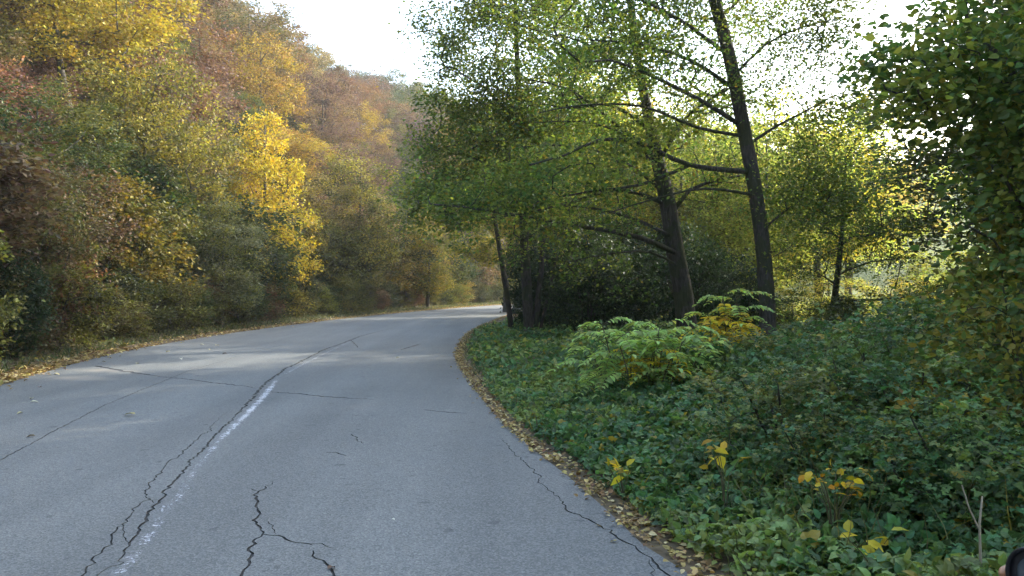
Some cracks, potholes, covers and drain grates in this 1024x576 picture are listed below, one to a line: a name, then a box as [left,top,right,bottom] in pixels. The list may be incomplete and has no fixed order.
crack [81,328,392,576]
crack [501,439,670,576]
